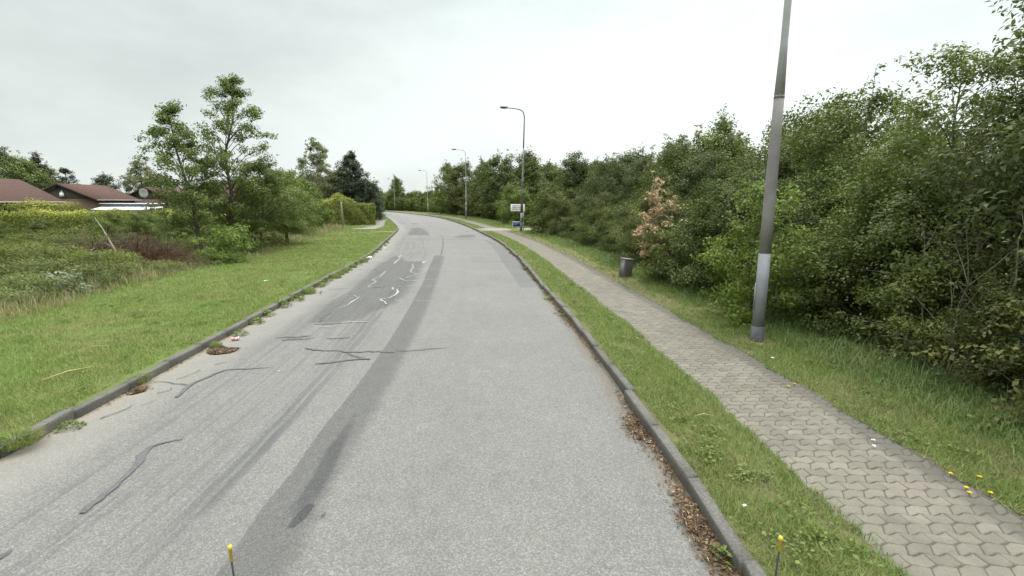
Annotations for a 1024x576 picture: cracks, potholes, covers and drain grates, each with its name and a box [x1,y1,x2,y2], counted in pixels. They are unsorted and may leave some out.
crack [319,256,440,339]
pothole [207,345,239,355]
